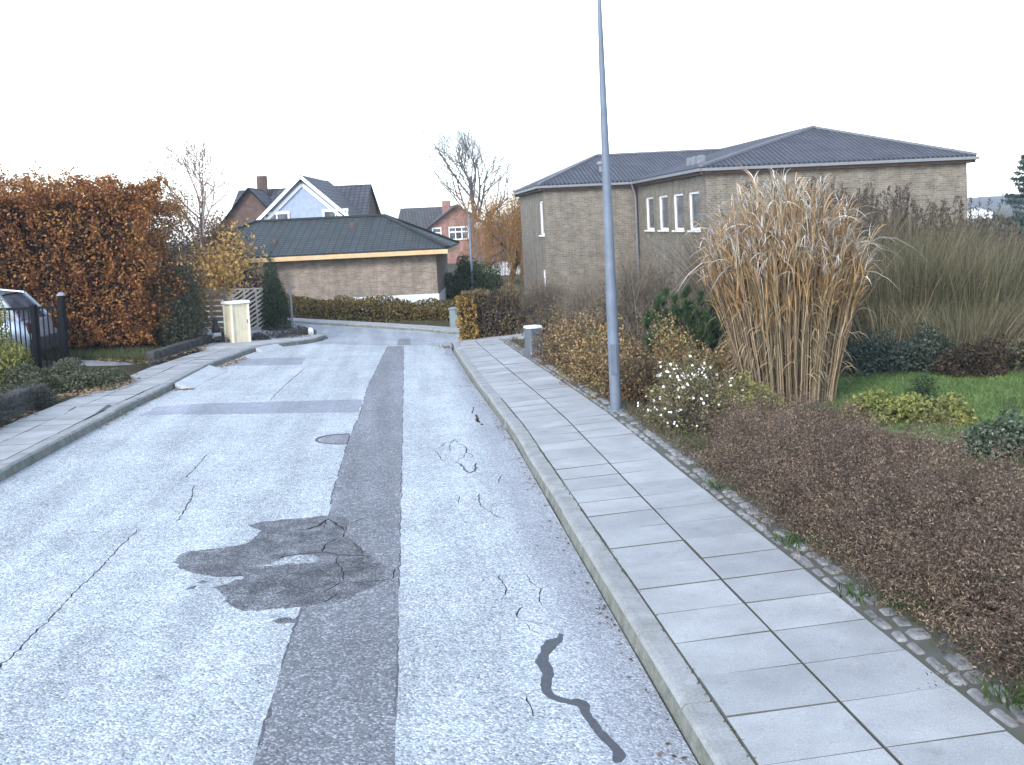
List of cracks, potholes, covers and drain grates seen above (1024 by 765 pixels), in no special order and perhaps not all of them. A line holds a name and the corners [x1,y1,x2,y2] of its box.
crack [497,574,555,638]
crack [177,454,208,521]
crack [279,517,396,604]
crack [458,475,503,525]
crack [433,439,478,473]
manhole cover [315,433,350,445]
crack [0,530,137,668]
